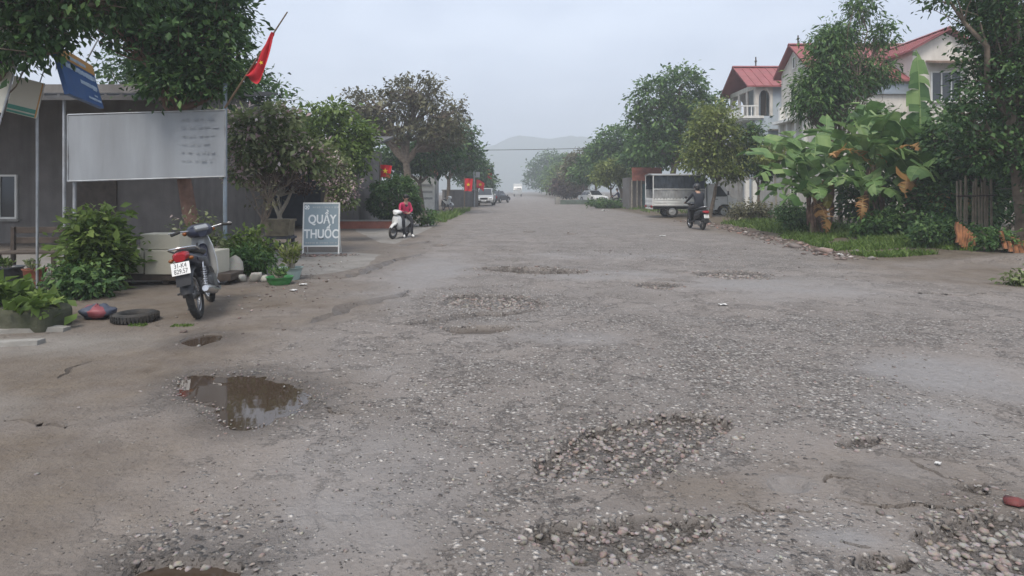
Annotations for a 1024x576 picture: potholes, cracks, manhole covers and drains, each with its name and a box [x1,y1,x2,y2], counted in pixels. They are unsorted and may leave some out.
pothole [172,372,321,431]
pothole [121,556,247,576]
pothole [441,325,515,334]
crack [734,474,988,514]
pothole [440,294,546,309]
pothole [909,513,1024,576]
pothole [477,266,589,274]
pothole [690,271,772,279]
pothole [834,436,887,450]
pothole [531,413,734,480]
pothole [528,515,716,567]
crack [57,361,92,378]
